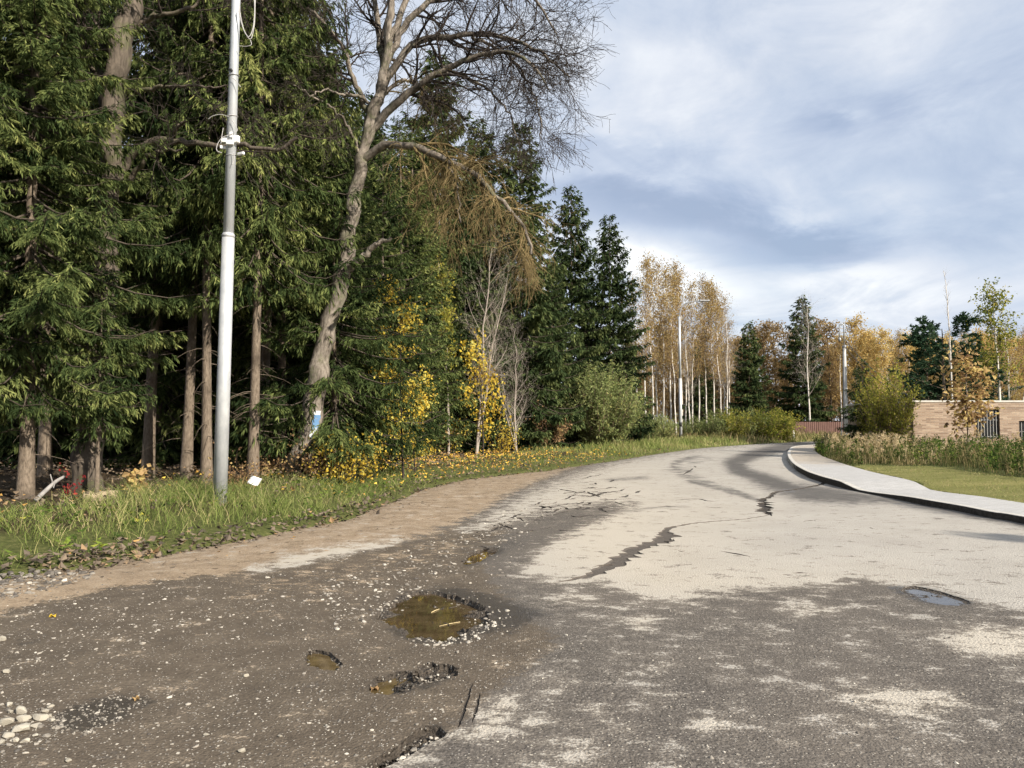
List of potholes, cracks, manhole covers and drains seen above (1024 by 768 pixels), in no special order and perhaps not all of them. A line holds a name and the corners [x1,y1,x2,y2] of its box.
pothole [900,586,971,606]
pothole [411,662,459,684]
crack [461,466,836,583]
pothole [363,725,447,768]
pothole [371,590,489,642]
pothole [304,650,343,670]
pothole [460,547,499,565]
pothole [366,671,420,695]
